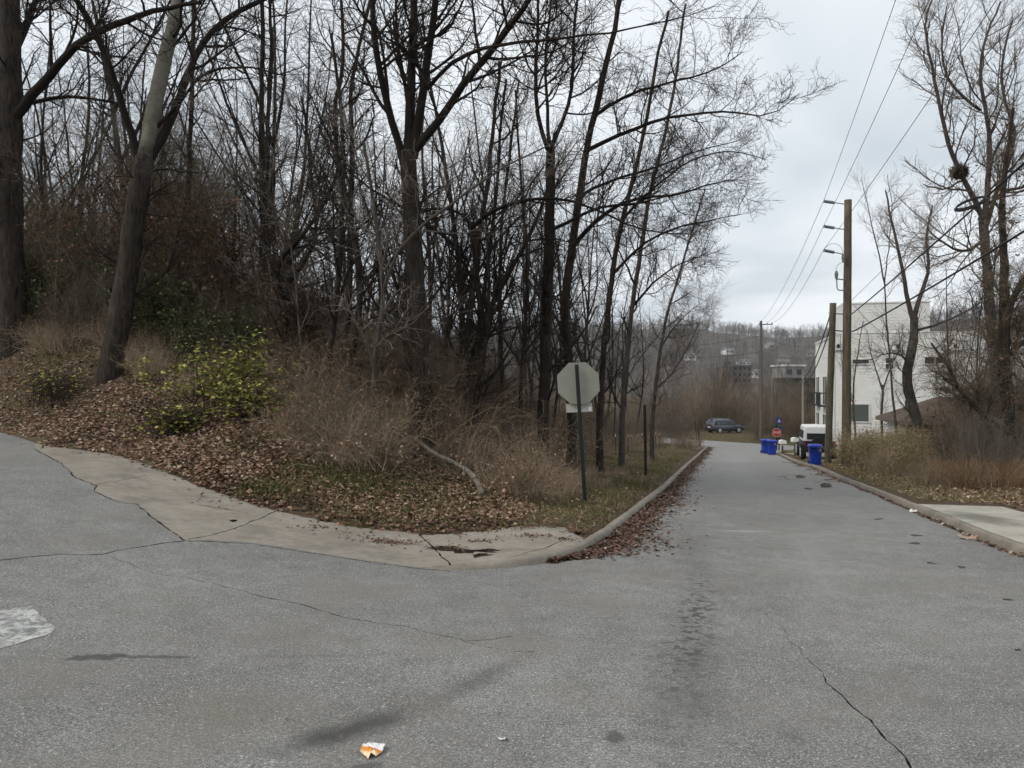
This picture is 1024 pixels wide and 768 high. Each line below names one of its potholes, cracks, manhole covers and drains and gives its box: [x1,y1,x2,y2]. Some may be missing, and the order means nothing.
pothole [428,546,502,554]
crack [602,572,912,768]
crack [0,511,534,652]
